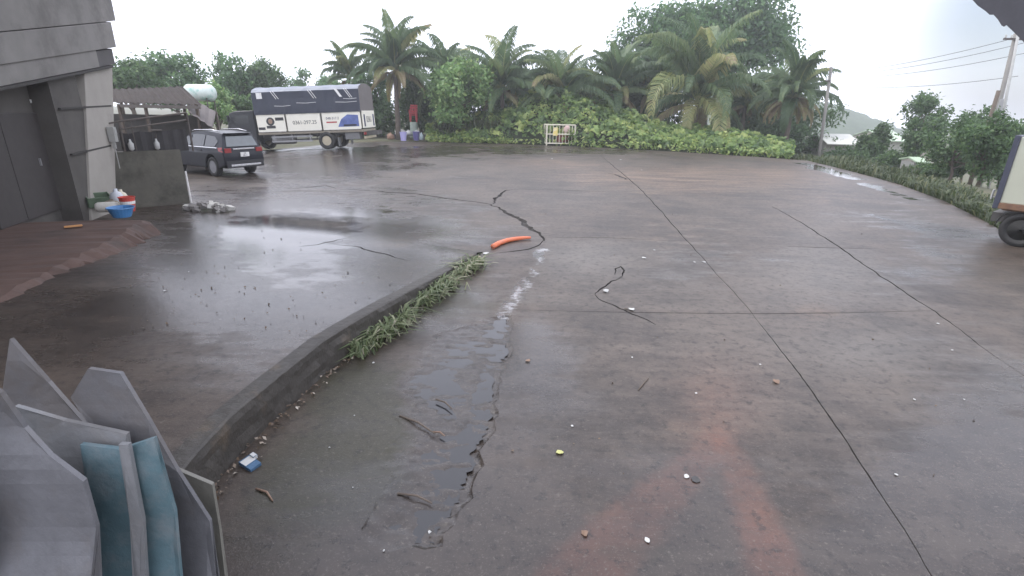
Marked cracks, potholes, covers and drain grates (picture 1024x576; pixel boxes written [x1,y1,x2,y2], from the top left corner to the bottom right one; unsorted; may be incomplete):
crack [300,238,410,261]
crack [285,185,545,253]
crack [595,266,656,325]
